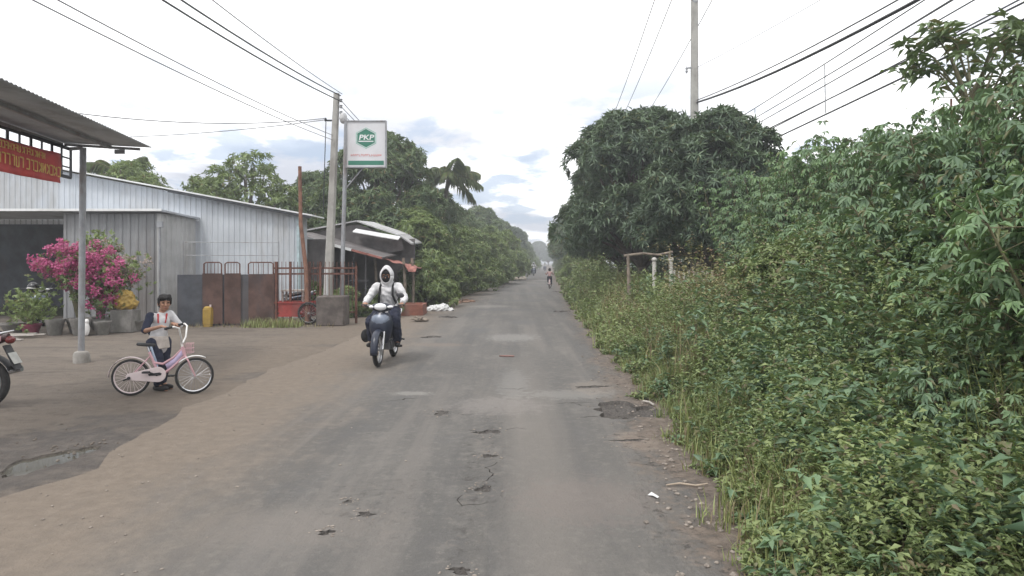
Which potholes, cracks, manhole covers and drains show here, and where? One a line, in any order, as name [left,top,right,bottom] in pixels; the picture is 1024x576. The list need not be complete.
pothole [448,567,470,575]
pothole [594,401,663,419]
pothole [0,444,101,478]
